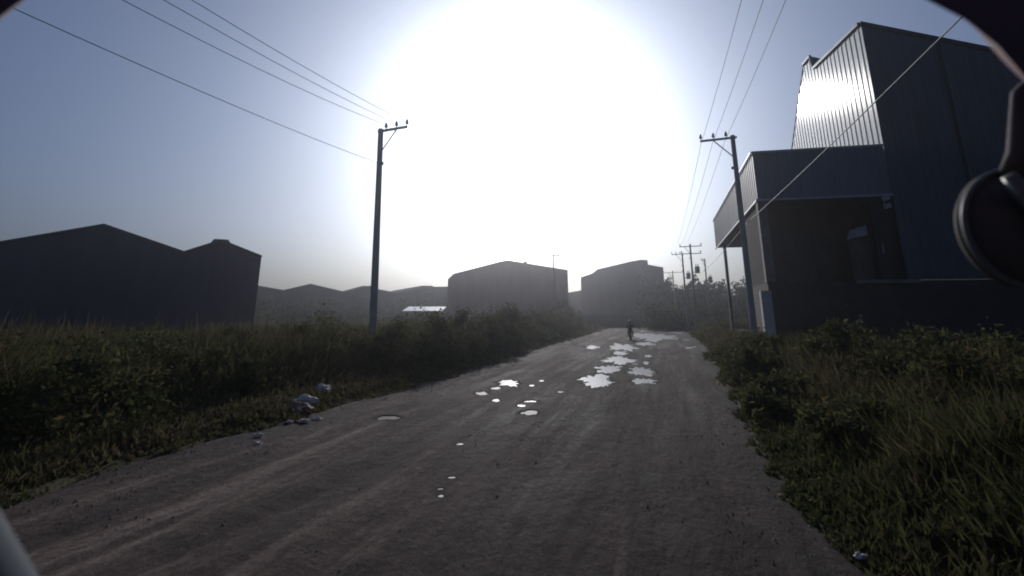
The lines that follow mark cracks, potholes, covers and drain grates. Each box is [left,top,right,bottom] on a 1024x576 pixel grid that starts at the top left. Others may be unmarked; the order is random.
pothole [570,372,629,389]
pothole [620,366,662,377]
pothole [606,342,642,352]
pothole [624,333,687,343]
pothole [591,364,630,374]
pothole [596,355,641,366]
pothole [626,377,661,385]
pothole [494,379,524,387]
